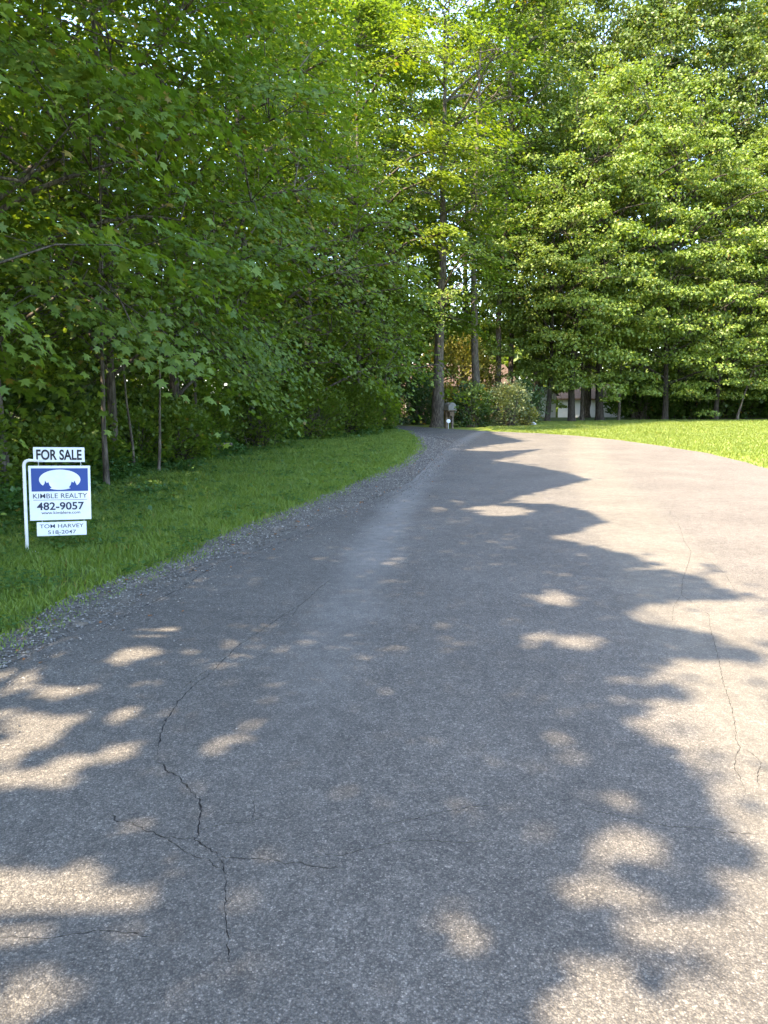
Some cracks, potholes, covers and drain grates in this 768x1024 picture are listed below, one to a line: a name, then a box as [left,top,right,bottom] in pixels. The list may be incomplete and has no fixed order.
crack [1,930,147,939]
crack [669,504,761,808]
crack [113,580,479,962]
